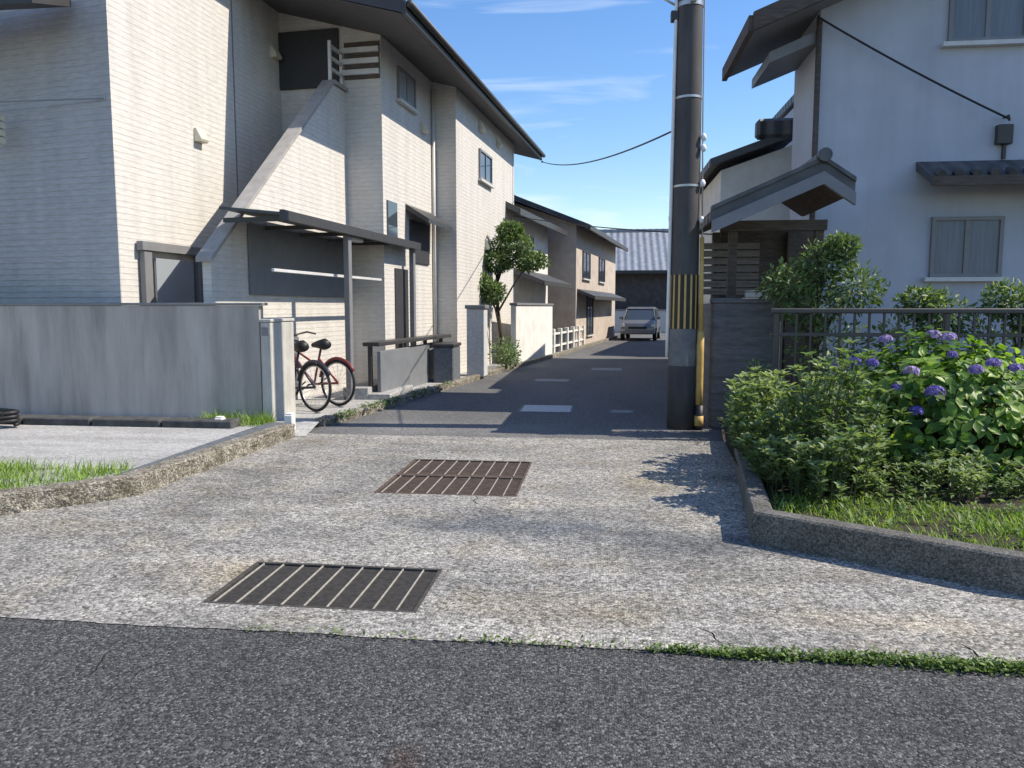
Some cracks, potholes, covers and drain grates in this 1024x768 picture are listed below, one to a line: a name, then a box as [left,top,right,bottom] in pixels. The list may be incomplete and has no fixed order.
drain grate [397,459,532,478]
drain grate [373,474,525,497]
drain grate [201,561,442,613]
crack [51,636,140,692]
